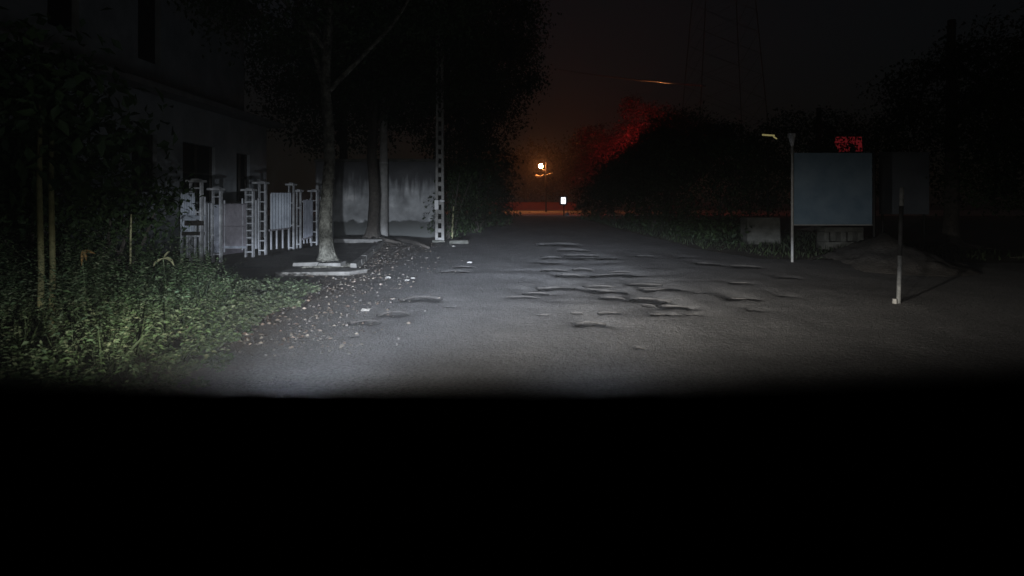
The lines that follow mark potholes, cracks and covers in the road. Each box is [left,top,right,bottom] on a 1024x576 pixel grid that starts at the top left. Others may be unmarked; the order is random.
pothole [398,295,443,303]
pothole [629,297,672,305]
